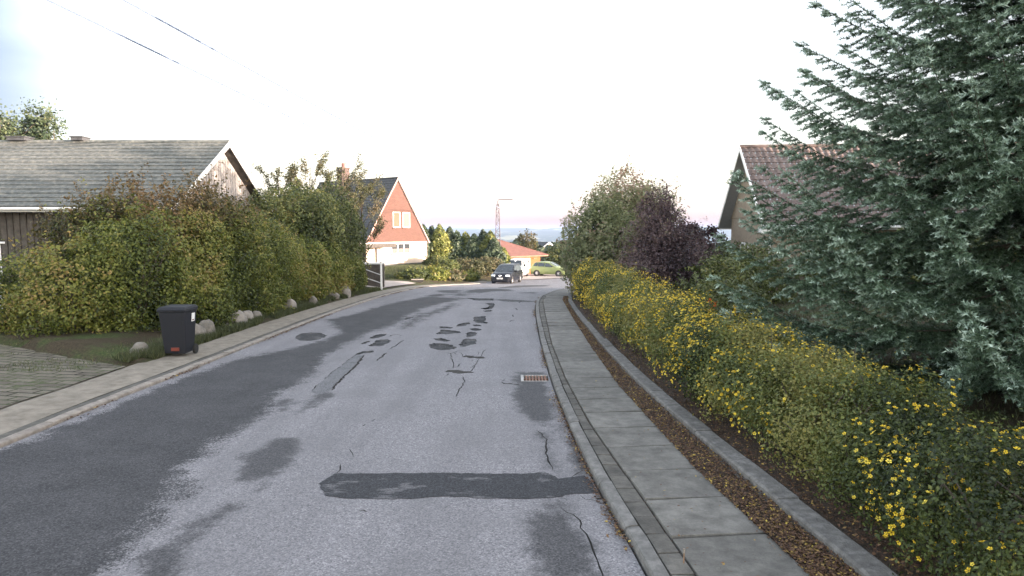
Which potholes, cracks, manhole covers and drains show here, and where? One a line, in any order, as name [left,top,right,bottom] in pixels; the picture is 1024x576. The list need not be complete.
crack [538,431,553,470]
crack [561,495,607,576]
crack [446,350,485,396]
